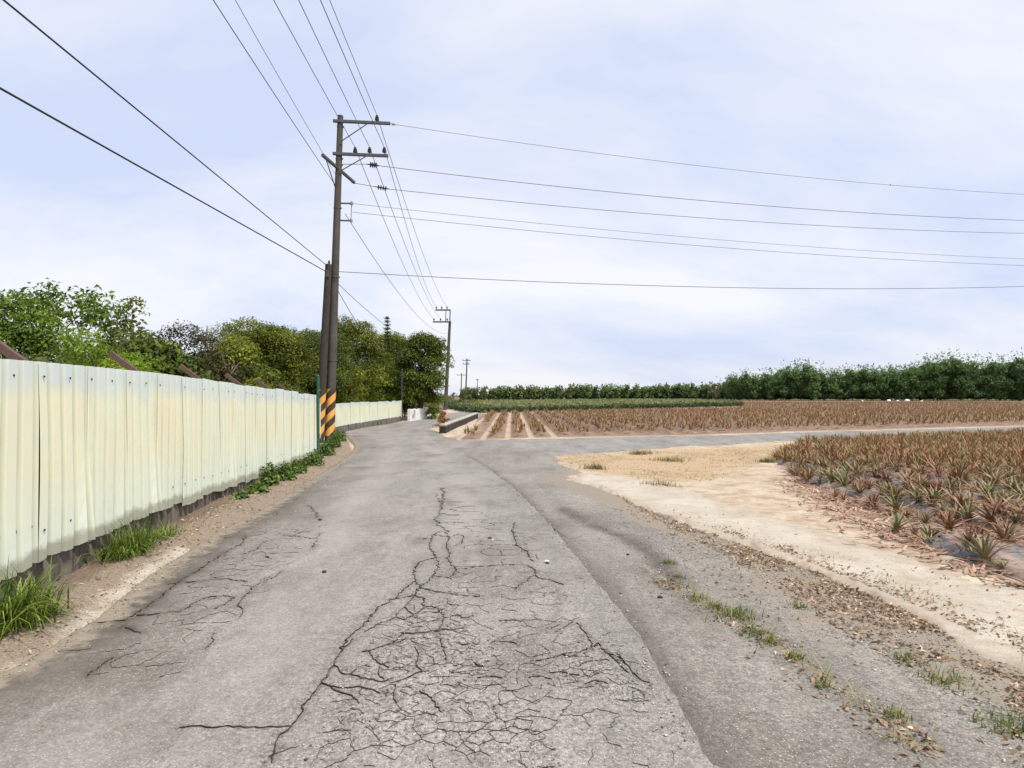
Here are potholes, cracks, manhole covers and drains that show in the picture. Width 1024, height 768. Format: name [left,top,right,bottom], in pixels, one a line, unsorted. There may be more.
crack [59,507,321,677]
crack [179,487,674,768]
